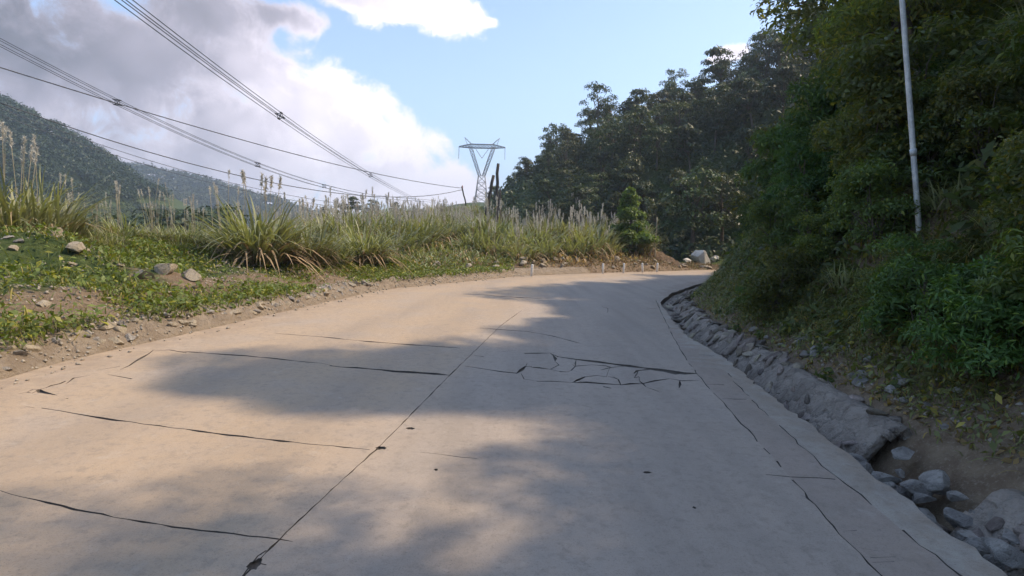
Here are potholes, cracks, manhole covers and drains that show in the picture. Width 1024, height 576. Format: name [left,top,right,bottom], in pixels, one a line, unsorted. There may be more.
crack [467,328,710,390]
